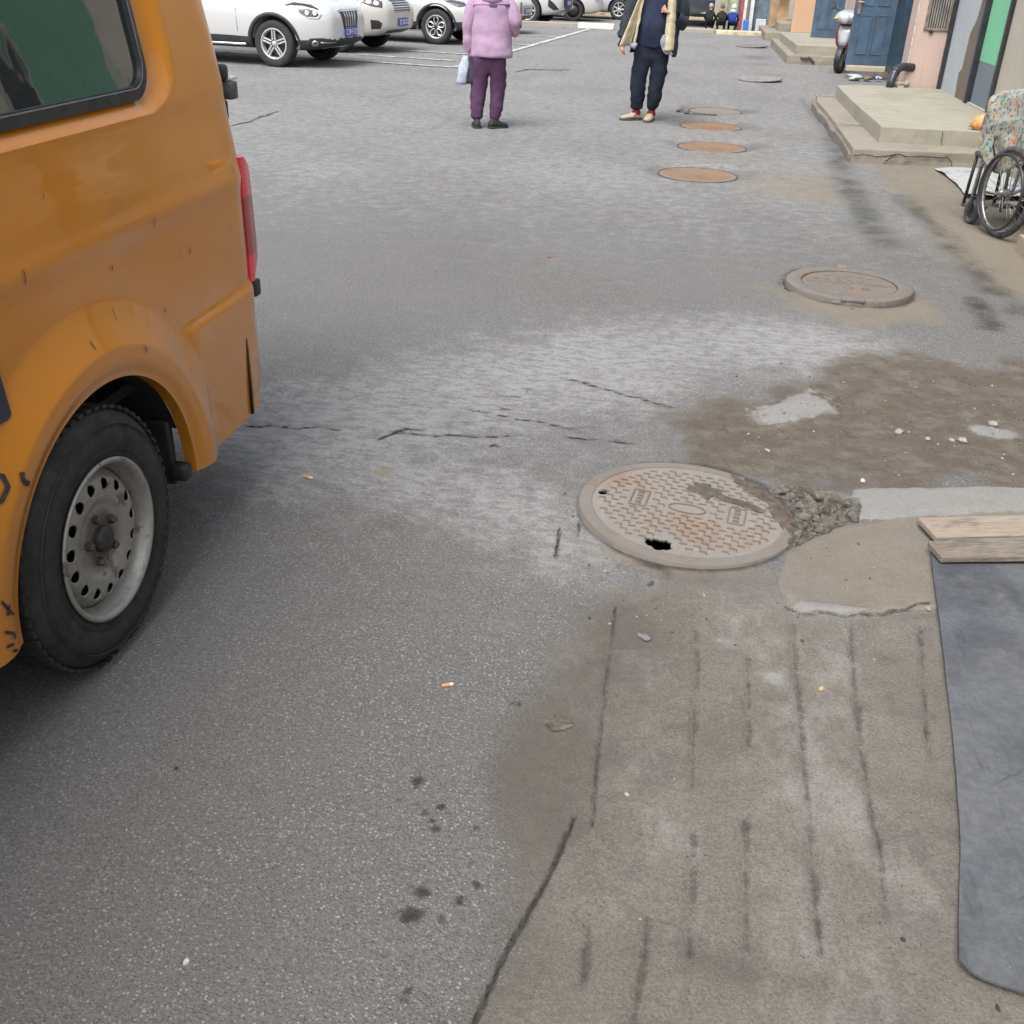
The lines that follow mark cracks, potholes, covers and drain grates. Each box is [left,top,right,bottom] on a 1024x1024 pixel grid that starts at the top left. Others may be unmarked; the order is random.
crack [571,379,670,408]
crack [379,410,625,447]
manhole cover [657,167,738,183]
manhole cover [680,122,742,131]
pothole [768,483,862,548]
manhole cover [677,142,747,153]
manhole cover [578,462,807,569]
manhole cover [784,265,914,307]
manhole cover [688,107,742,115]
